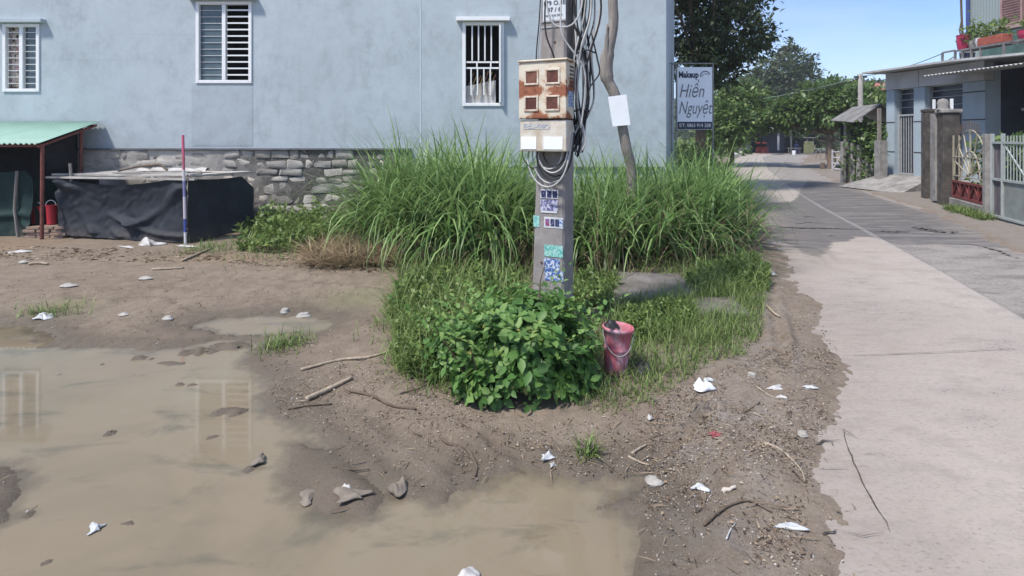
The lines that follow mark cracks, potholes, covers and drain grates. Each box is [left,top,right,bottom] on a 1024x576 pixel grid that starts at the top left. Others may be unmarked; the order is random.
crack [816,435,890,542]
